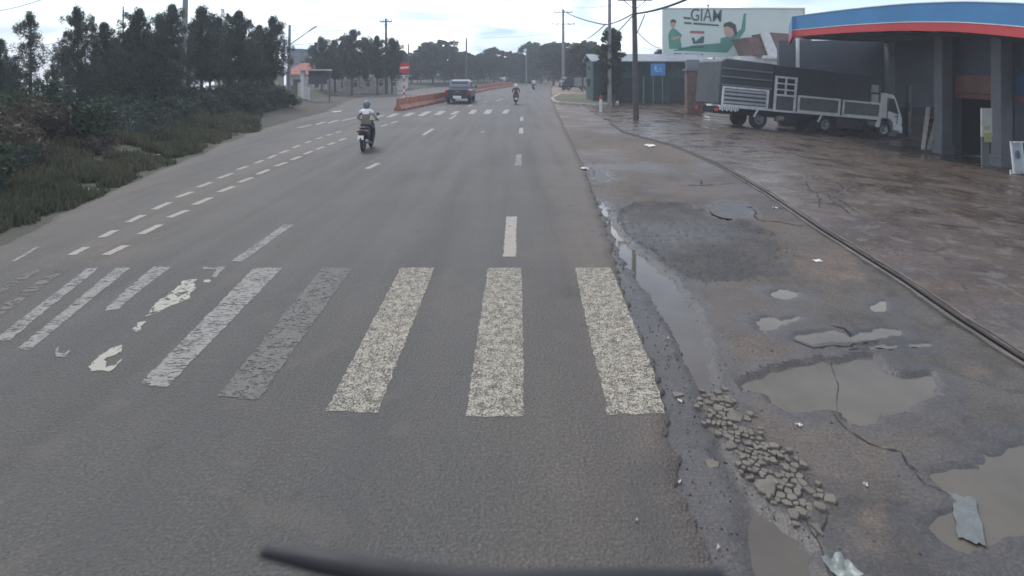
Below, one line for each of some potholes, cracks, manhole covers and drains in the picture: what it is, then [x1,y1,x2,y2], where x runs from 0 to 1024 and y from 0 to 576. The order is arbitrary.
crack [746,177,859,226]
pothole [733,349,949,427]
crack [787,325,947,493]
pothole [596,199,832,576]
